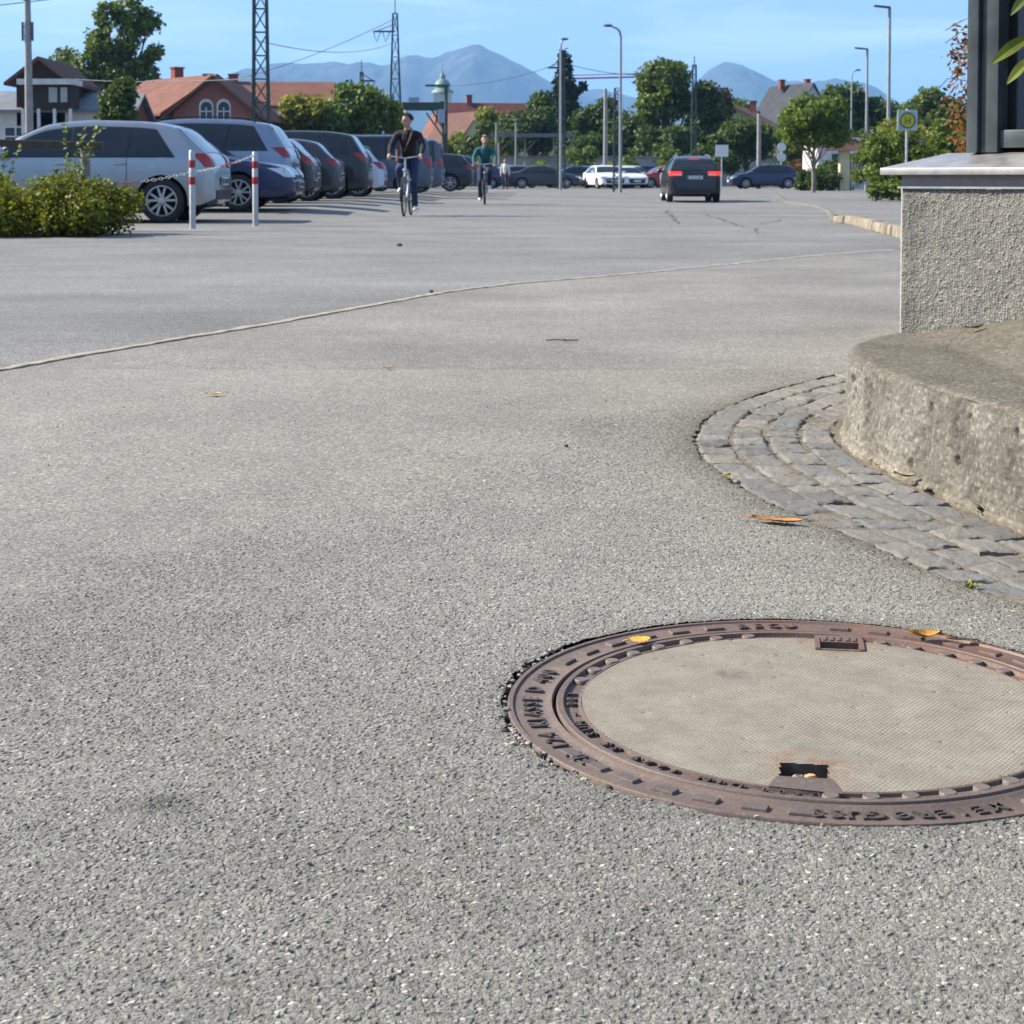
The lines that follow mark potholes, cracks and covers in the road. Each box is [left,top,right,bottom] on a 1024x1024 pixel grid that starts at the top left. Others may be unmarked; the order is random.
manhole cover [507,620,1024,828]
